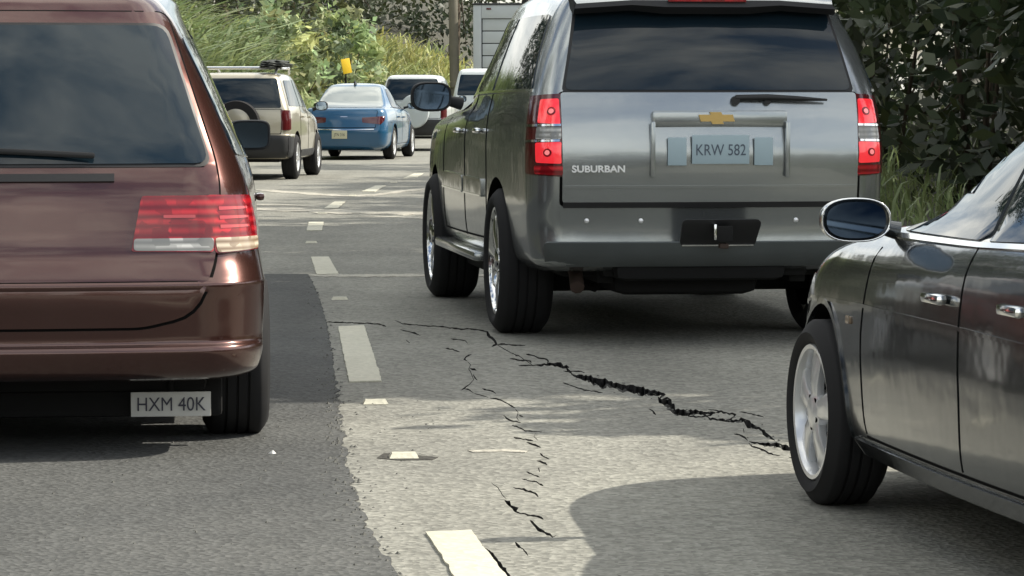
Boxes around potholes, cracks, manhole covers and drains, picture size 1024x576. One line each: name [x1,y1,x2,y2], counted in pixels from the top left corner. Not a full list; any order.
crack [328,320,791,576]
